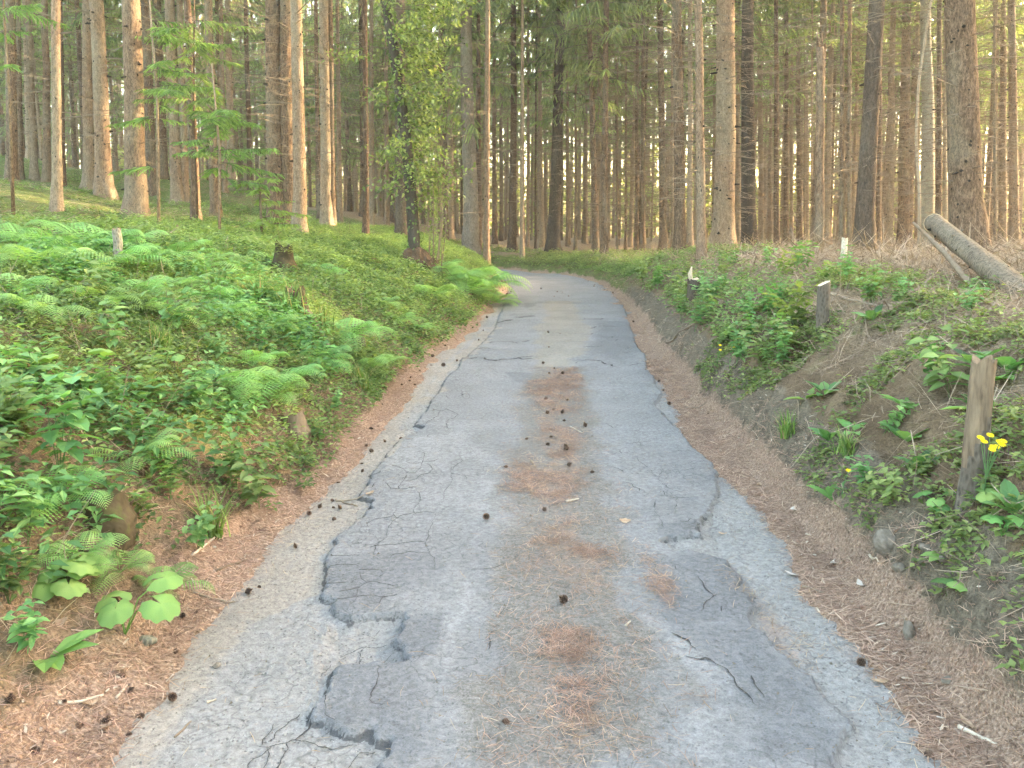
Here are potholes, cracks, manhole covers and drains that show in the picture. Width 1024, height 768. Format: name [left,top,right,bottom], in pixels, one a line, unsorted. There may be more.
crack [325,555,394,610]
crack [370,390,470,569]
pothole [305,608,413,711]
crack [470,340,532,361]
crack [671,632,764,702]
crack [247,690,375,768]
